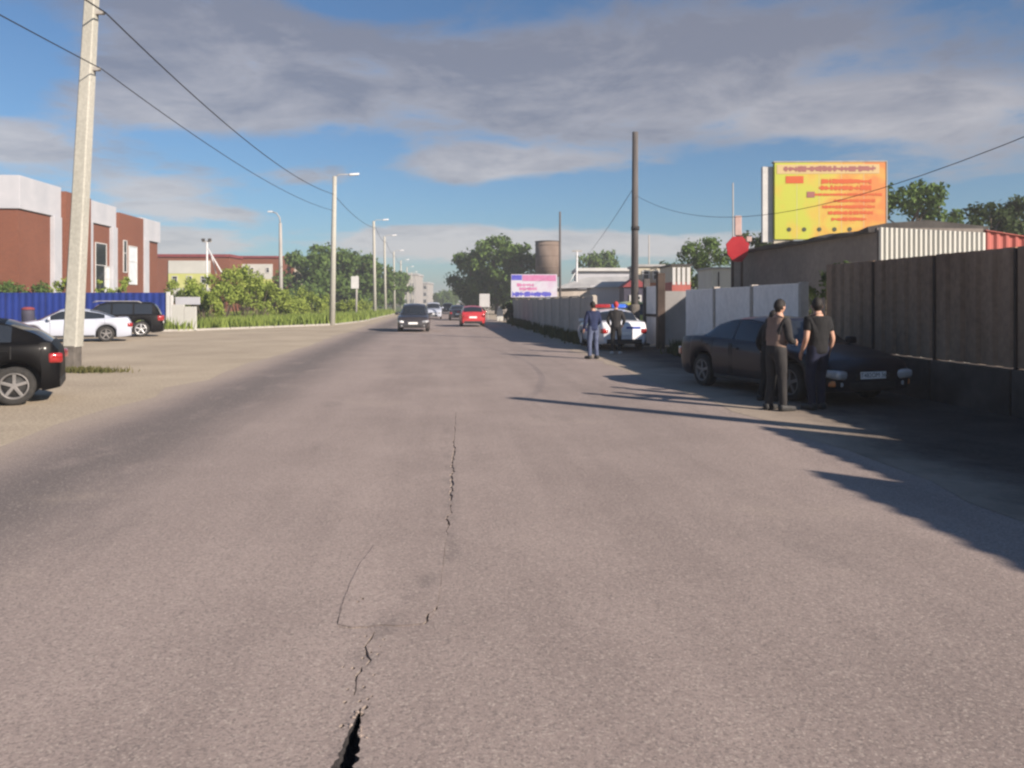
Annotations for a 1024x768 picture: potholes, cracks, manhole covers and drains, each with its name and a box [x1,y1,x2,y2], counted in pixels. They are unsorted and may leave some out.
crack [337,545,437,728]
